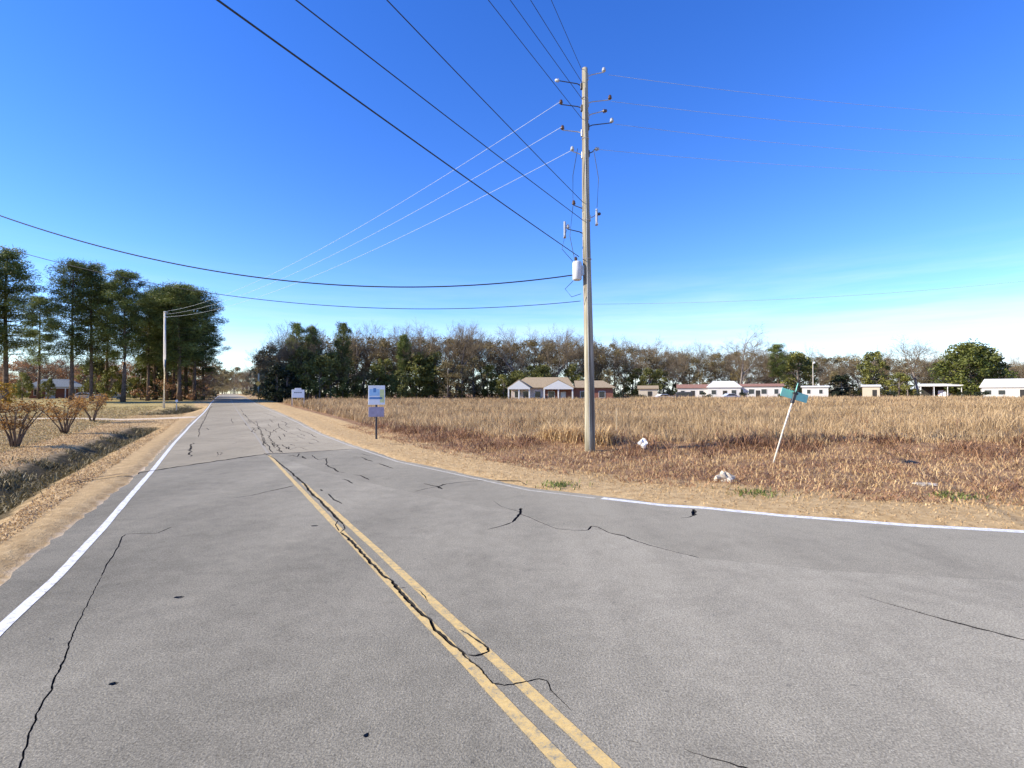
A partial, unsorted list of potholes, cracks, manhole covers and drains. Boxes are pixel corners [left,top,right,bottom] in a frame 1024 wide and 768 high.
crack [217,411,699,709]
crack [18,527,171,768]
crack [867,597,1024,640]
